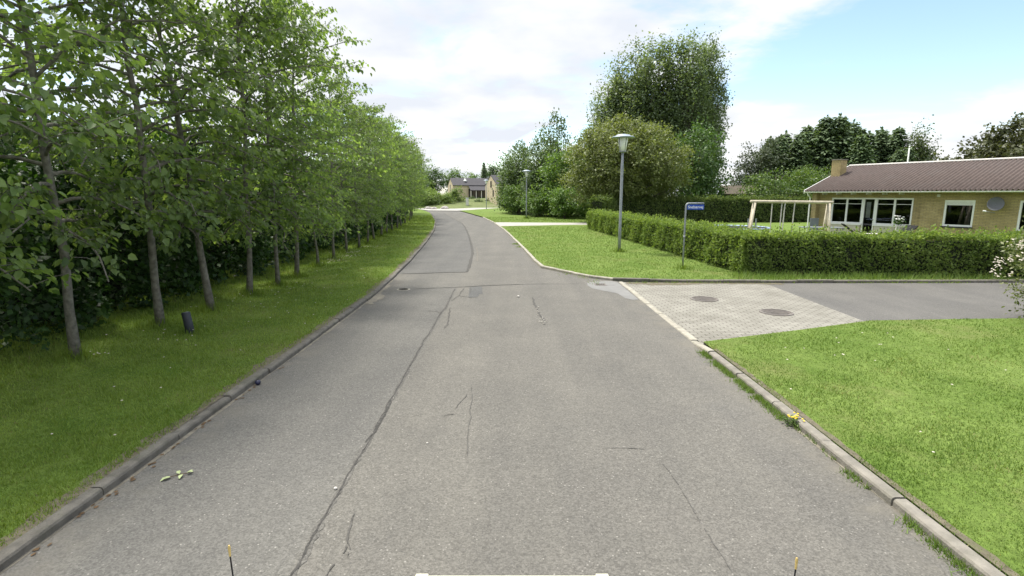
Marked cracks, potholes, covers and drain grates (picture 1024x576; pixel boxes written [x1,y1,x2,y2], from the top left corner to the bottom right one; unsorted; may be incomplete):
crack [325,513,355,576]
crack [444,386,473,455]
crack [417,284,548,328]
crack [662,463,735,576]
